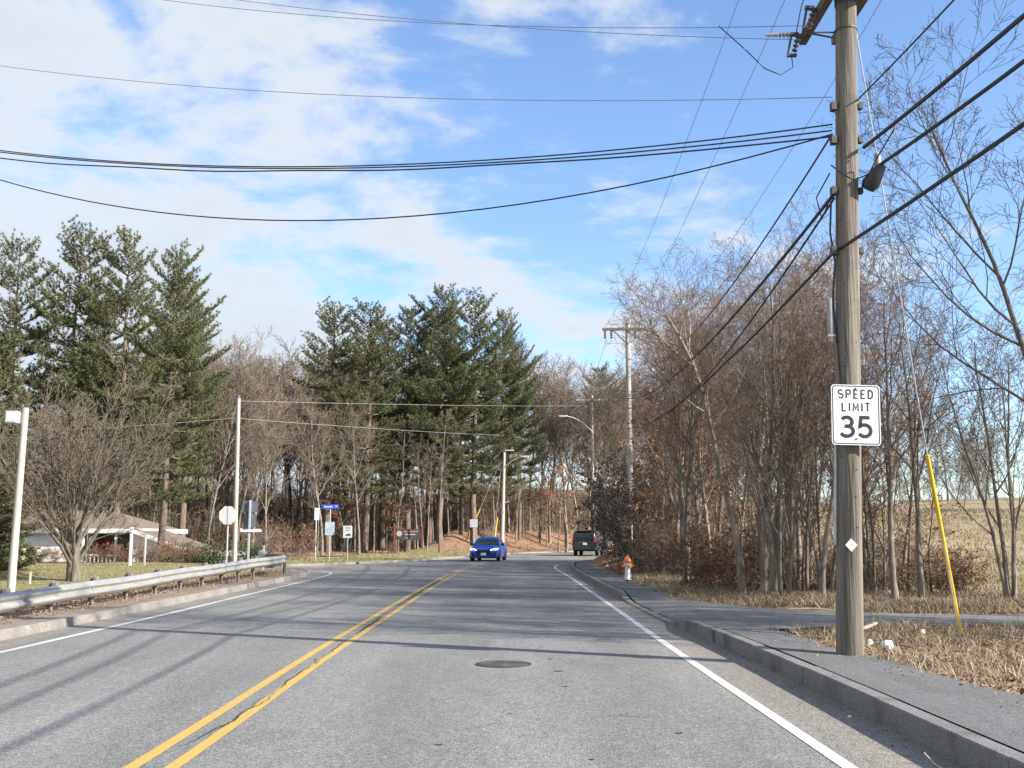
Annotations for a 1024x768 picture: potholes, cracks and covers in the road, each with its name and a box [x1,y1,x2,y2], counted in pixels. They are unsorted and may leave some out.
manhole cover [475,660,532,668]
